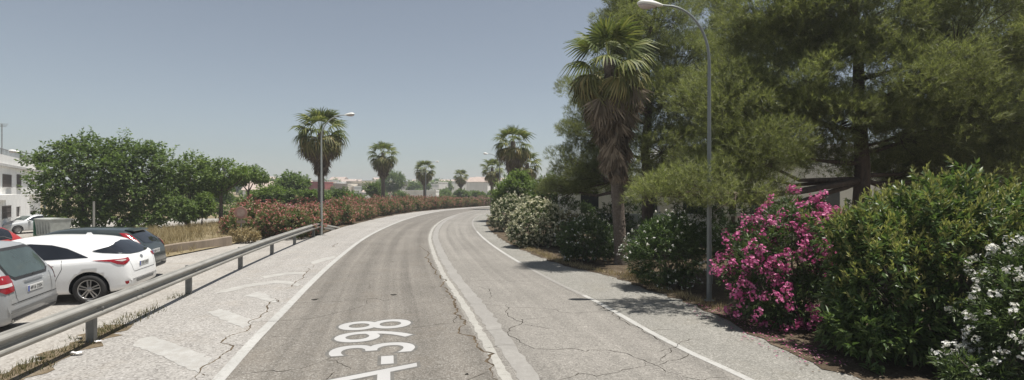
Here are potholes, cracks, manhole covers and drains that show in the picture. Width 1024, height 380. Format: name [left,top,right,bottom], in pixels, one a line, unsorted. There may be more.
crack [195,266,381,380]
crack [415,280,728,380]
